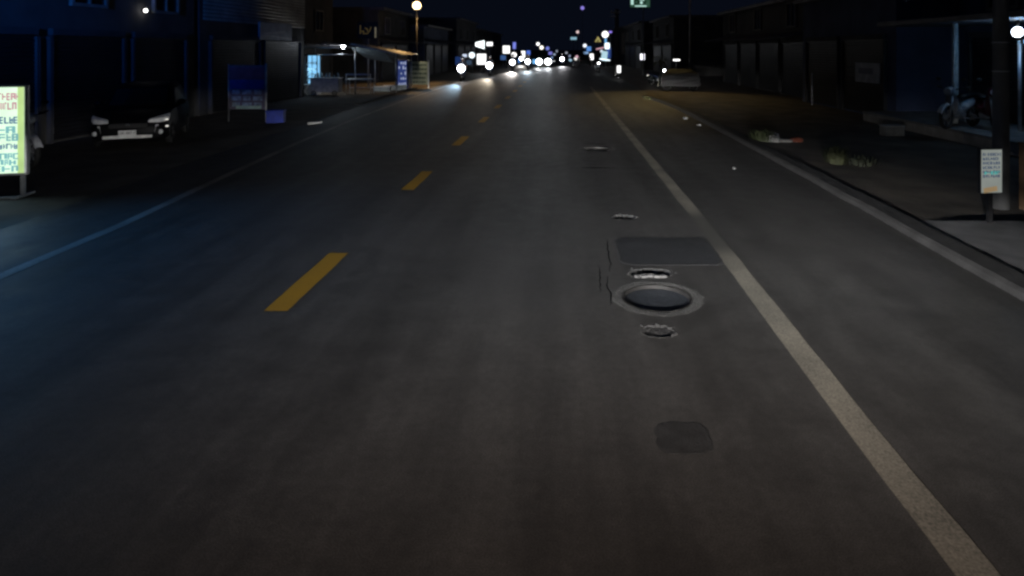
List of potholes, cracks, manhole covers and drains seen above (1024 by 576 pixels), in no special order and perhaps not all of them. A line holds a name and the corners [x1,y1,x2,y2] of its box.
manhole cover [612,281,705,317]
crack [599,239,612,305]
pothole [640,323,677,339]
pothole [625,267,677,278]
